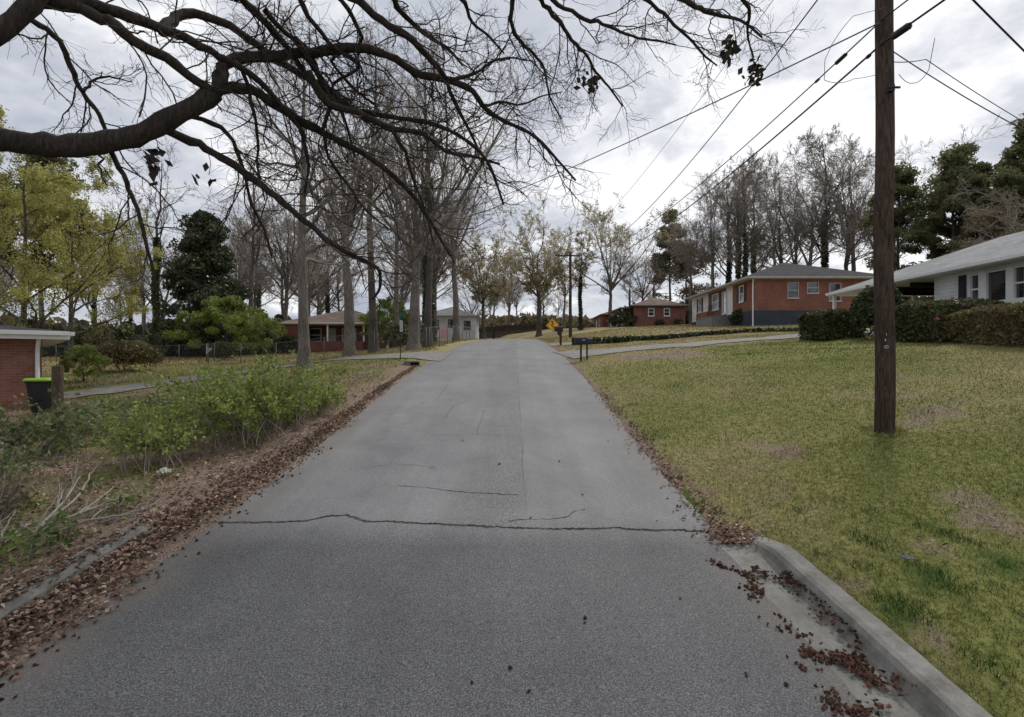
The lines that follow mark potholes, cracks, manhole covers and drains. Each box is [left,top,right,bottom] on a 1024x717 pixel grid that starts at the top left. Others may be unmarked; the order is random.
crack [219,509,710,533]
